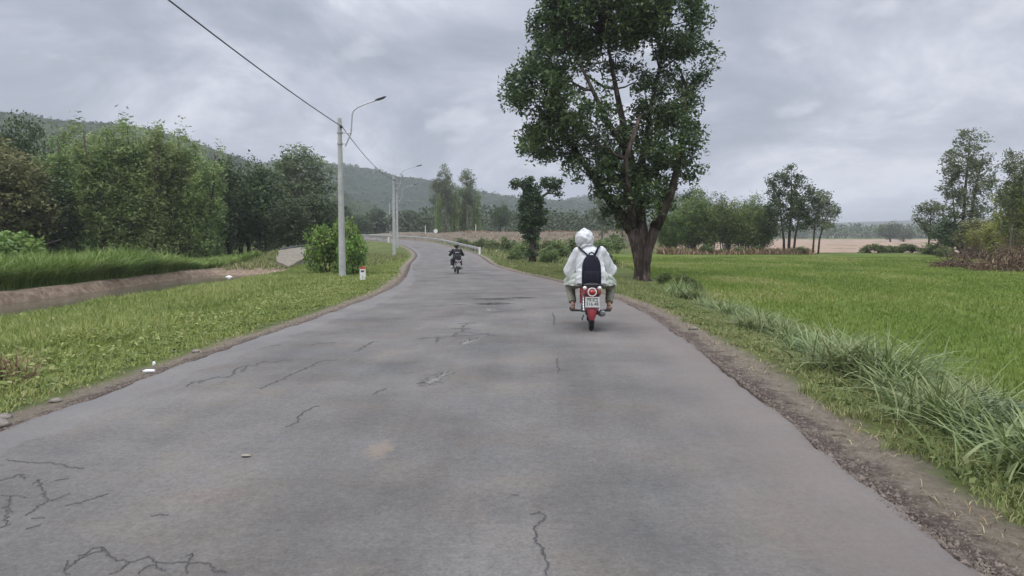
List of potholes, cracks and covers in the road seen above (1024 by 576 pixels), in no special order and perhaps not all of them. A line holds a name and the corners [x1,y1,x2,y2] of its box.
pothole [415,369,456,387]
crack [186,341,377,389]
crack [510,494,550,575]
crack [62,546,227,575]
crack [285,405,320,427]
crack [0,459,108,530]
crack [421,323,495,343]
